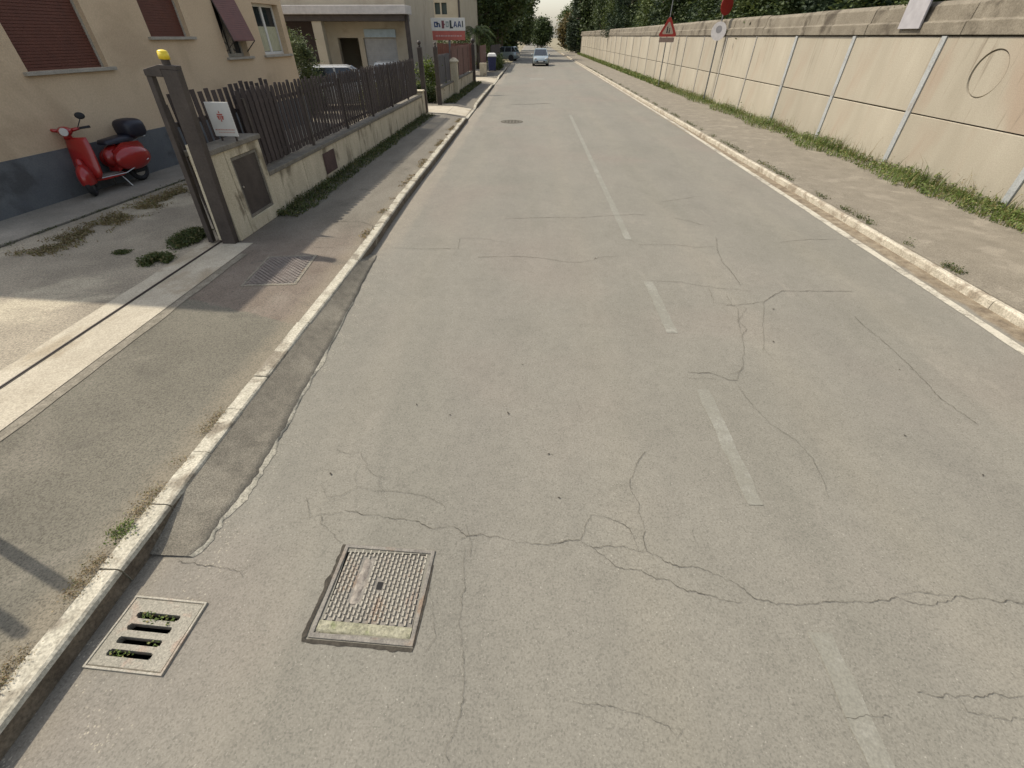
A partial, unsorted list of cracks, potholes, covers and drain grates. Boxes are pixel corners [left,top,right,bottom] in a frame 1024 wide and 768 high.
crack [650,239,829,499]
crack [346,452,1022,762]
drain grate [82,595,208,677]
crack [300,449,443,541]
manhole cover [301,544,435,652]
